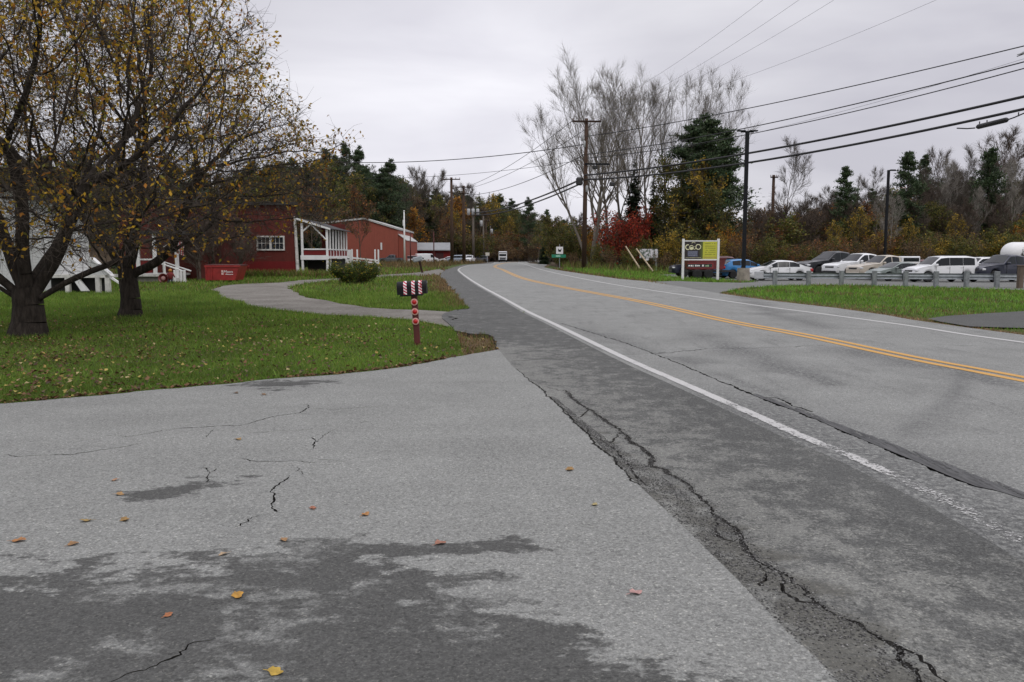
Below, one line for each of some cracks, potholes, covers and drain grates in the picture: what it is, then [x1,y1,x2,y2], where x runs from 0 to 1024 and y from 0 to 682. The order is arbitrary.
crack [548,387,947,682]
crack [114,640,210,681]
crack [240,432,329,526]
